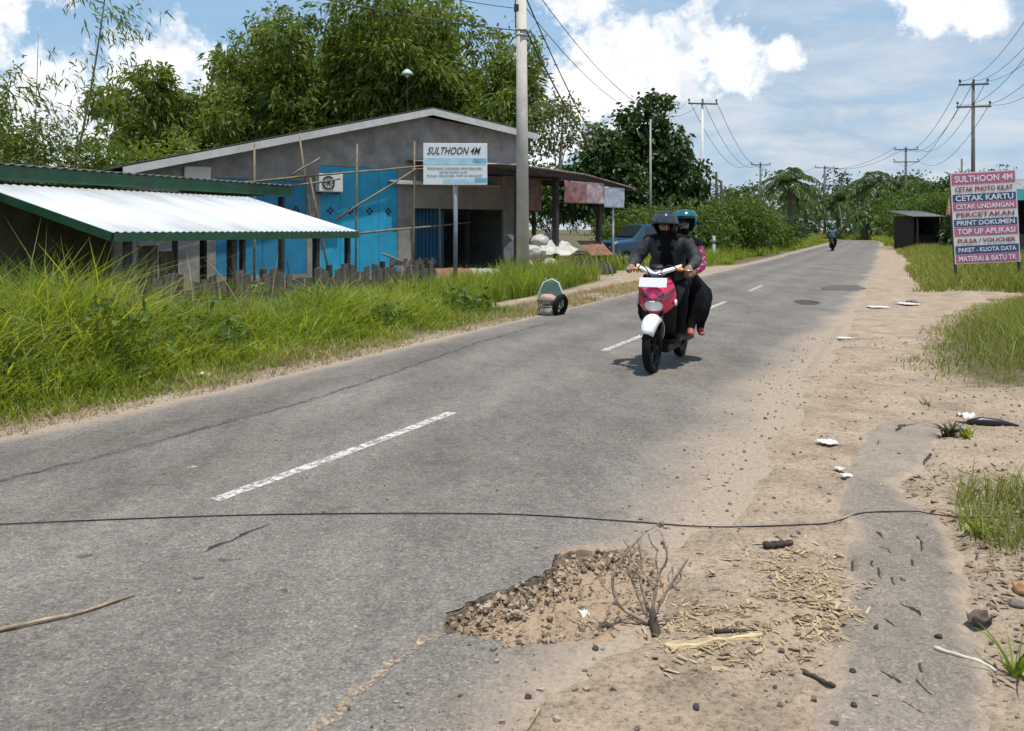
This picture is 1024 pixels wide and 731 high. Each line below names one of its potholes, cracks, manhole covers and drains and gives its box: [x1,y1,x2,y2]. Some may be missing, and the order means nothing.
pothole [442,545,670,649]
crack [309,633,447,731]
crack [204,527,261,552]
